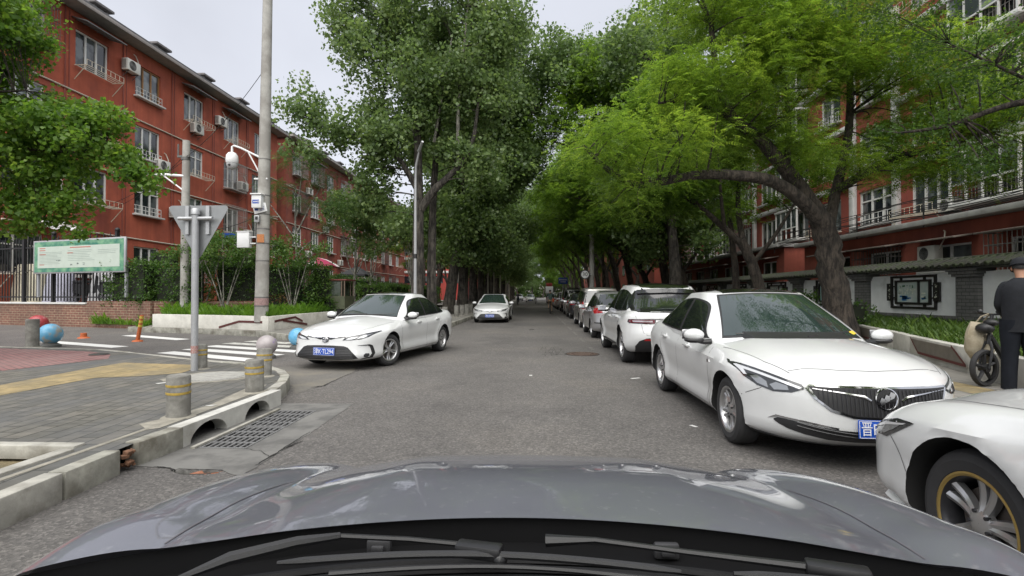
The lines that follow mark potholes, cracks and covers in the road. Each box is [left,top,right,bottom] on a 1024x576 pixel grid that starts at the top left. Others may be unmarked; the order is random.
drain grate [190,408,315,449]
